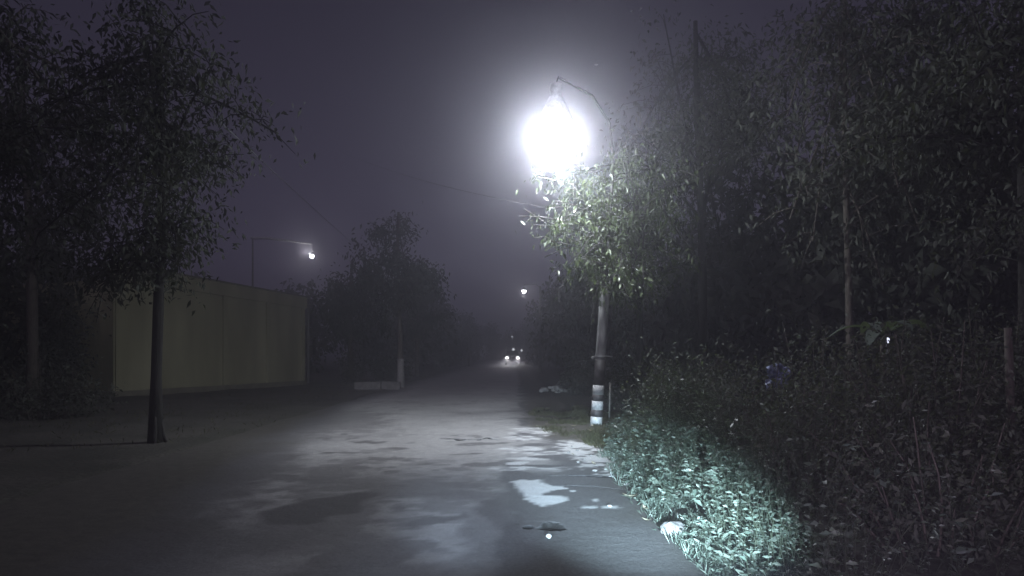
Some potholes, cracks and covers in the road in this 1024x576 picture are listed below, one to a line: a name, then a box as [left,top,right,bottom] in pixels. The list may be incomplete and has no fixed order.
pothole [521,521,569,532]
